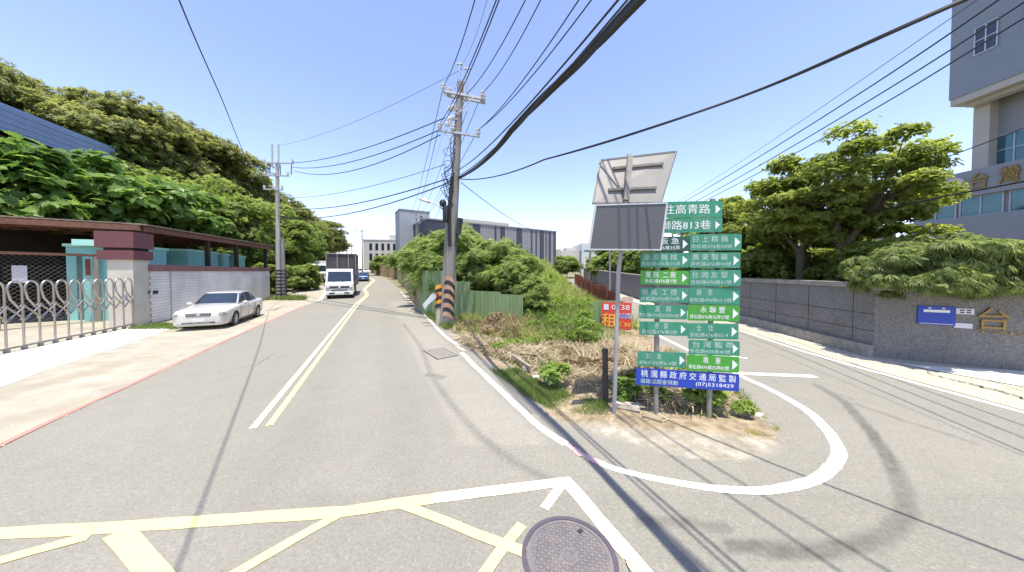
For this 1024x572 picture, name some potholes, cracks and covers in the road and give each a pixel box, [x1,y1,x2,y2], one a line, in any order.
manhole cover [522,516,619,572]
